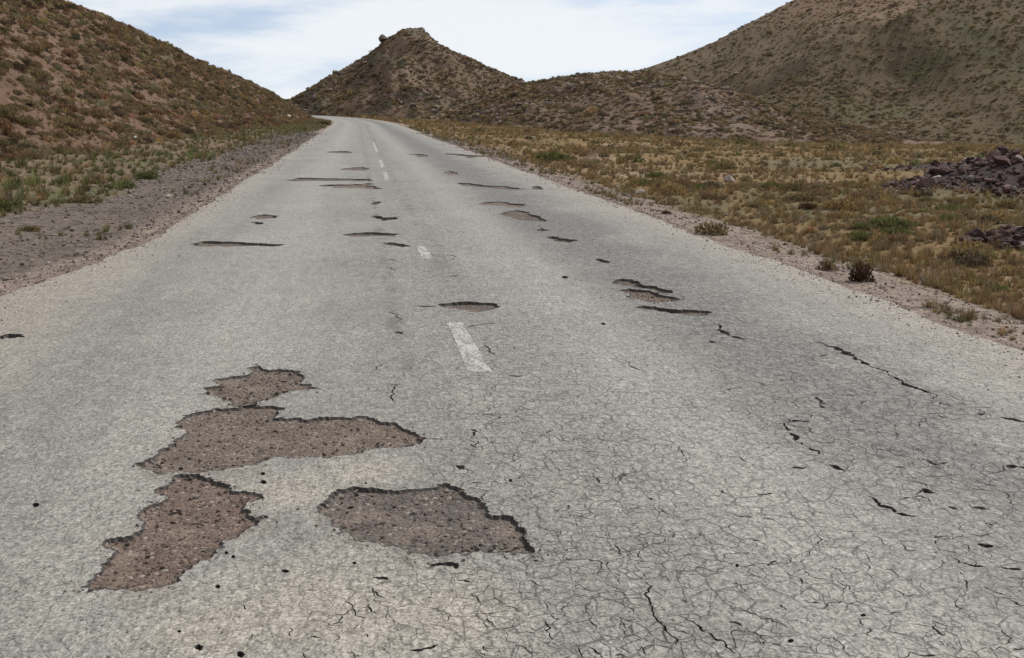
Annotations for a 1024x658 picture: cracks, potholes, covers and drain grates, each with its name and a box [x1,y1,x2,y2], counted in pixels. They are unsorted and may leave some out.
pothole [296,482,549,564]
crack [288,576,450,658]
crack [375,363,398,402]
crack [456,341,1024,658]
pothole [202,364,330,408]
pothole [612,279,673,294]
pothole [612,287,686,304]
crack [708,323,745,343]
pothole [132,404,426,477]
pothole [437,301,502,312]
pothole [499,210,546,222]
